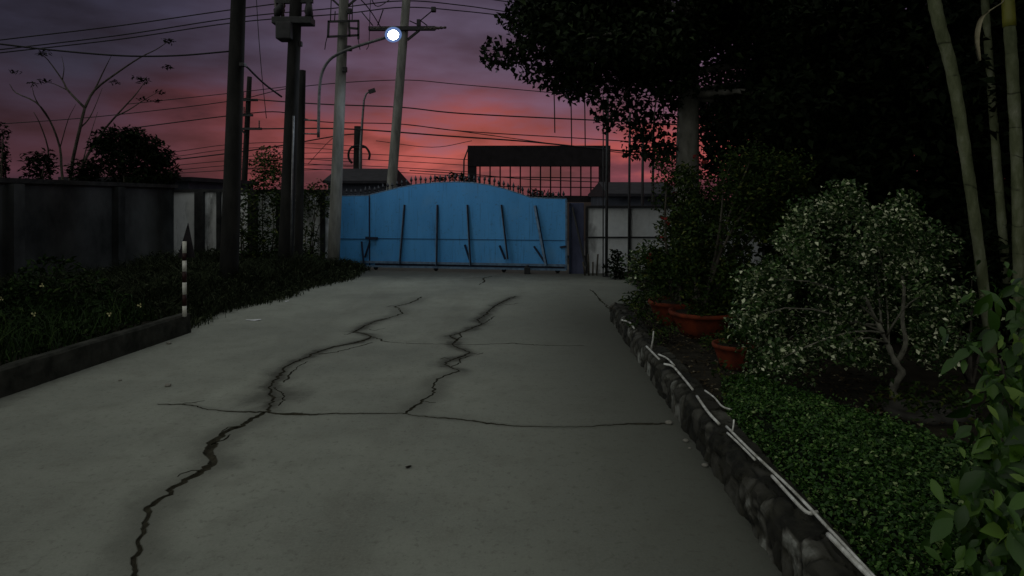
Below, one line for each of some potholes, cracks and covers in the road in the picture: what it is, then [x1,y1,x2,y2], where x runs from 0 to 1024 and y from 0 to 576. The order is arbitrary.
crack [130,296,665,576]
